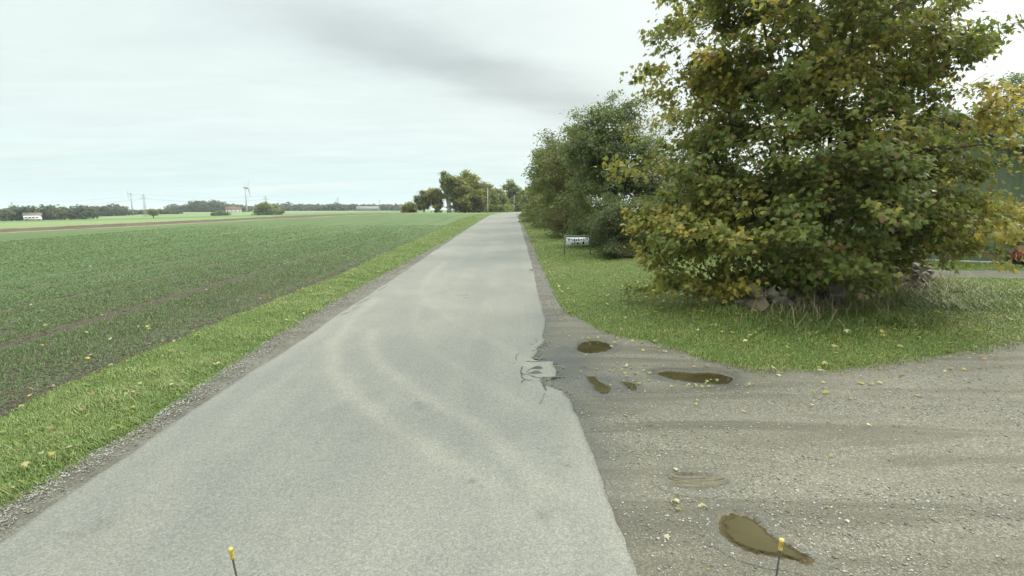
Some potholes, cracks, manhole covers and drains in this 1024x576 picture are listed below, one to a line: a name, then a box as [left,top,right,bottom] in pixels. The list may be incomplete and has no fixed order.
pothole [645,366,745,388]
pothole [610,377,647,395]
pothole [698,500,836,576]
pothole [569,337,621,356]
crack [513,341,557,404]
pothole [577,371,621,397]
